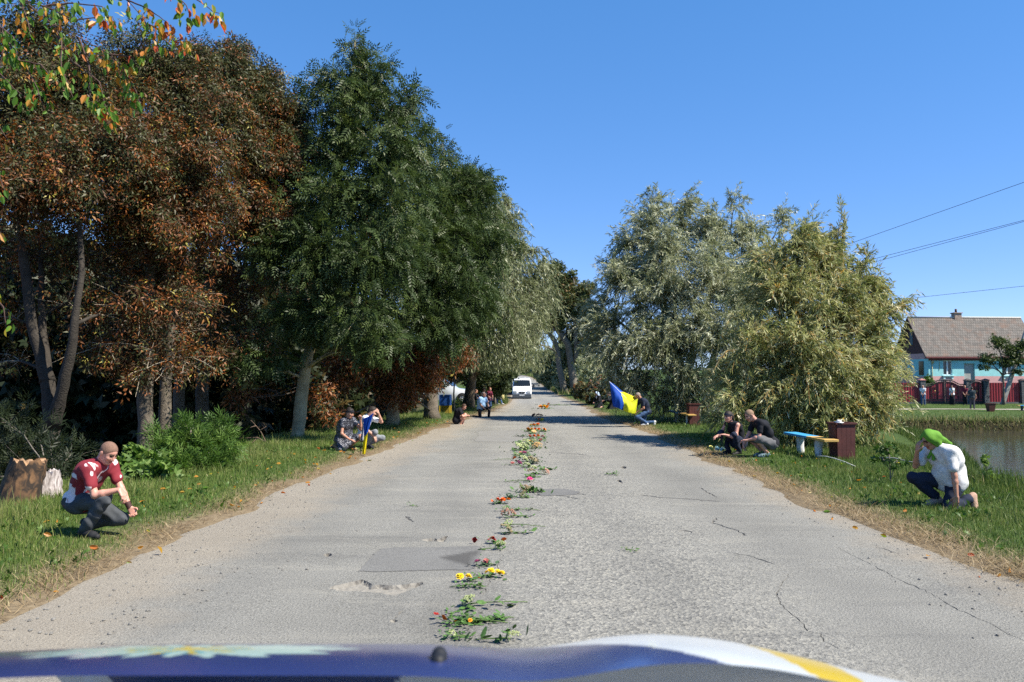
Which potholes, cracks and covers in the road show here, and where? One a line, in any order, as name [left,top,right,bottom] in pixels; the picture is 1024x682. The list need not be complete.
pothole [330,579,423,596]
crack [643,488,839,649]
crack [840,547,1024,641]
